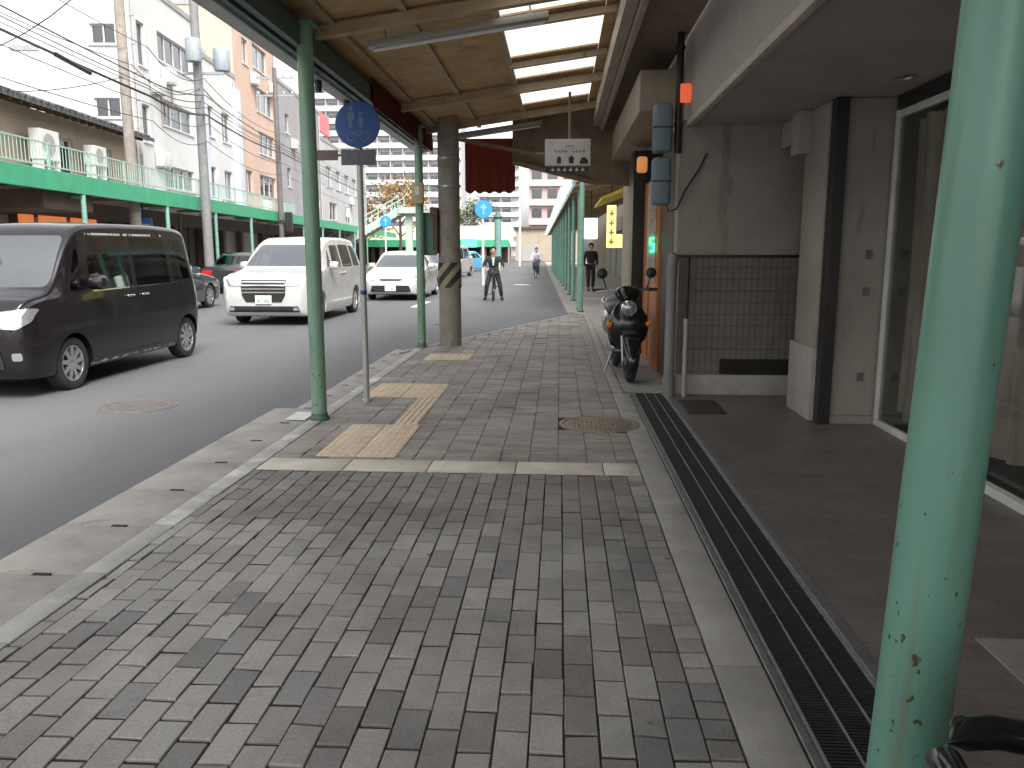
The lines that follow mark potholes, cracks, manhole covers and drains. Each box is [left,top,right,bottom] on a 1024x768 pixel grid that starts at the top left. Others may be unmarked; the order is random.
drain grate [703,528,826,616]
drain grate [657,439,723,475]
drain grate [633,393,678,413]
drain grate [678,400,728,415]
drain grate [643,413,697,439]
drain grate [747,614,876,768]
manhole cover [96,399,178,414]
drain grate [675,474,763,529]
manhole cover [559,416,640,434]
